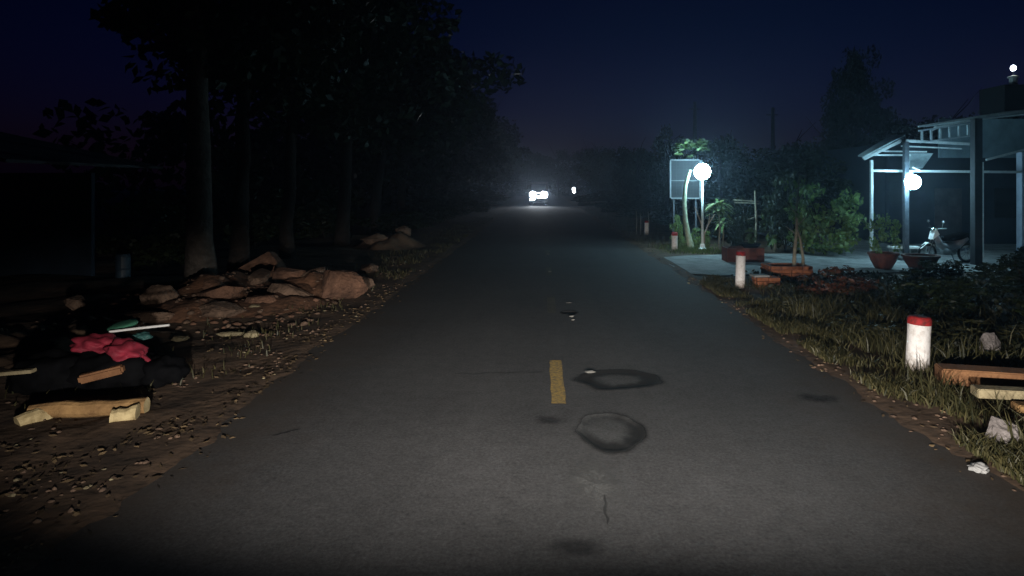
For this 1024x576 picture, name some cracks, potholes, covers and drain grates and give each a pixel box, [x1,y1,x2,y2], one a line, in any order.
pothole [573,369,664,390]
pothole [575,413,647,454]
